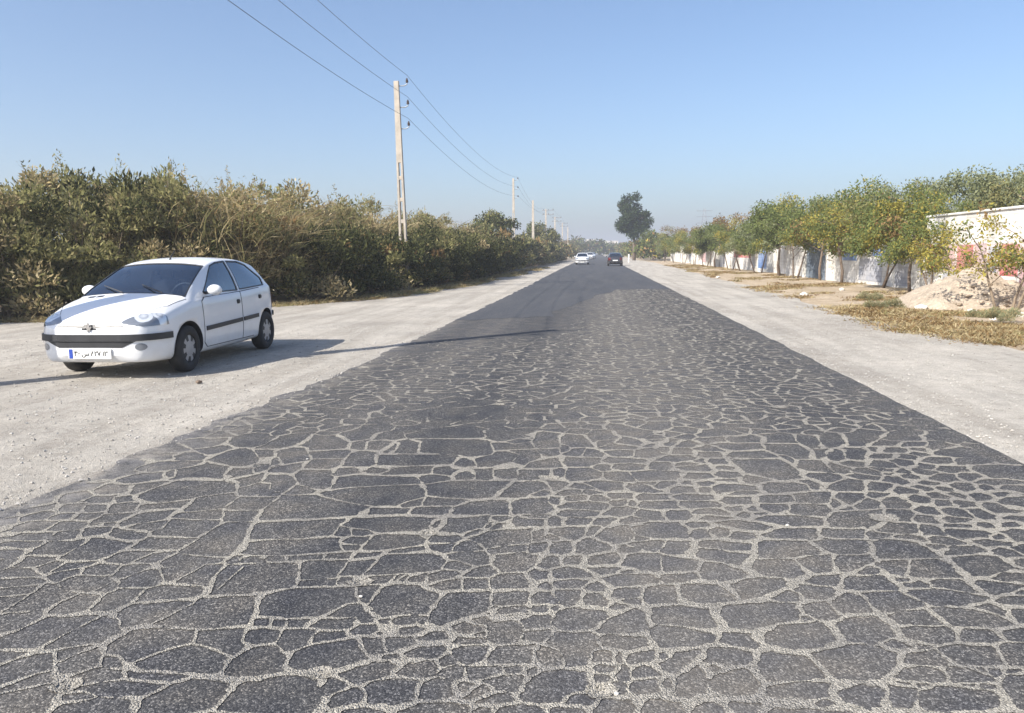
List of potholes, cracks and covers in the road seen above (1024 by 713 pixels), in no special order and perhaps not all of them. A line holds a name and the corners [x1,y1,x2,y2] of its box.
crack [0,289,1024,713]
